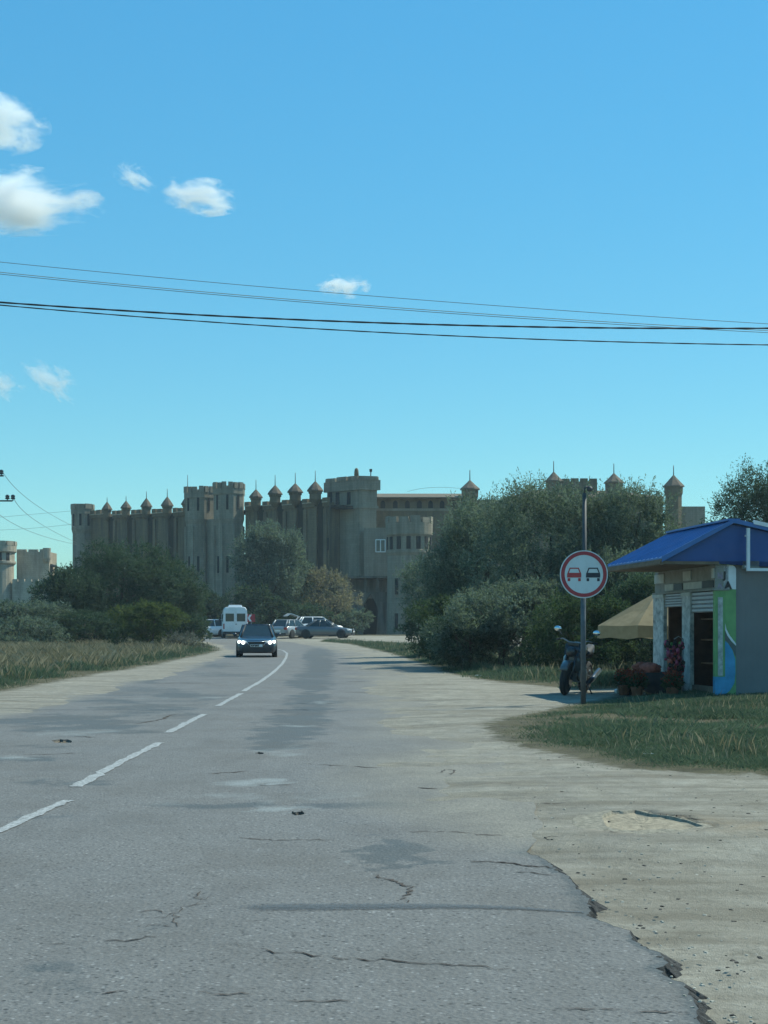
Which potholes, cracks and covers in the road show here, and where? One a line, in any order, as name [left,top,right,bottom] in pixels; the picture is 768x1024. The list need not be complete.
pothole [572,810,713,834]
crack [52,891,507,969]
crack [474,861,554,875]
crack [375,874,414,902]
